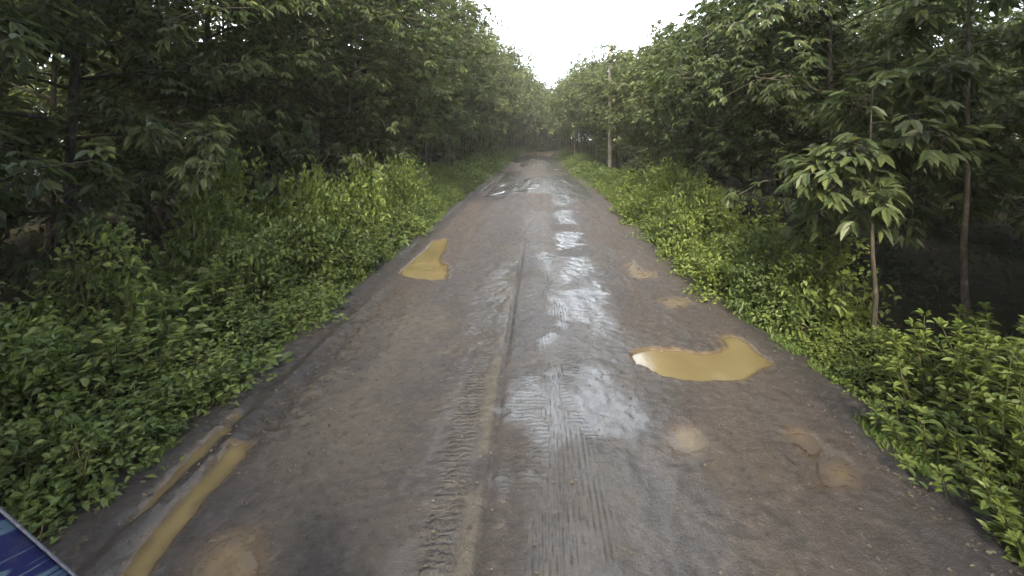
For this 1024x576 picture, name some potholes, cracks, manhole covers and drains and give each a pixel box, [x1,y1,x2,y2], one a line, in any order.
pothole [114,436,260,576]
pothole [654,295,698,309]
pothole [774,420,885,496]
pothole [662,421,714,458]
pothole [182,520,281,576]
pothole [397,238,453,280]
pothole [622,259,662,281]
pothole [628,332,782,384]
